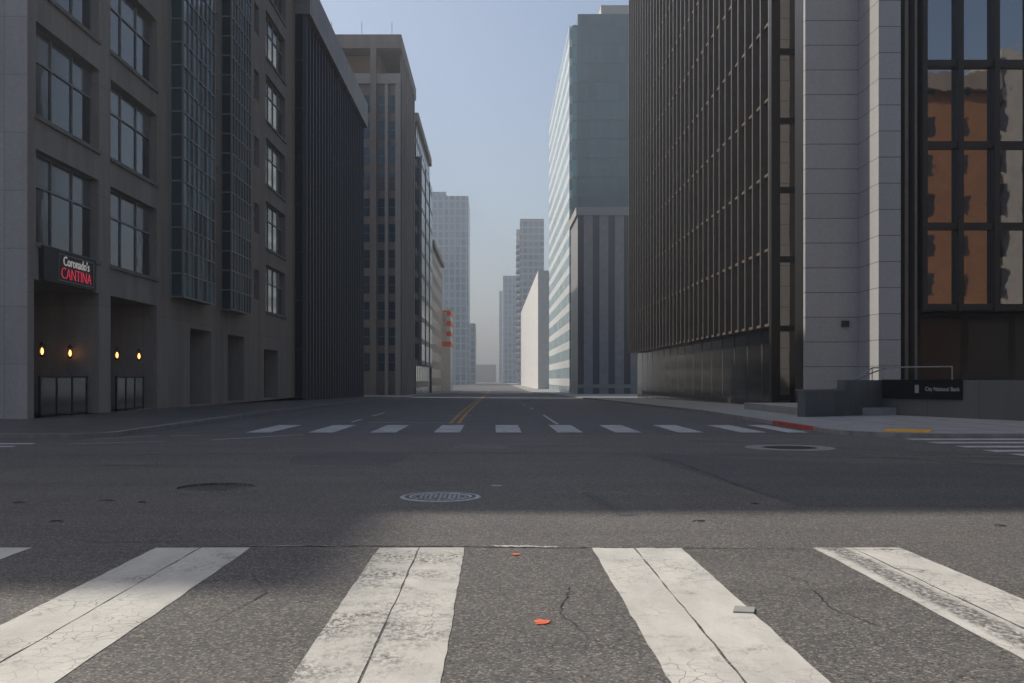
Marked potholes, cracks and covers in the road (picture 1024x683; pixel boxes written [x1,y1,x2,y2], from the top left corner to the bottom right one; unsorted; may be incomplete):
manhole cover [400,492,481,502]
manhole cover [153,483,278,496]
